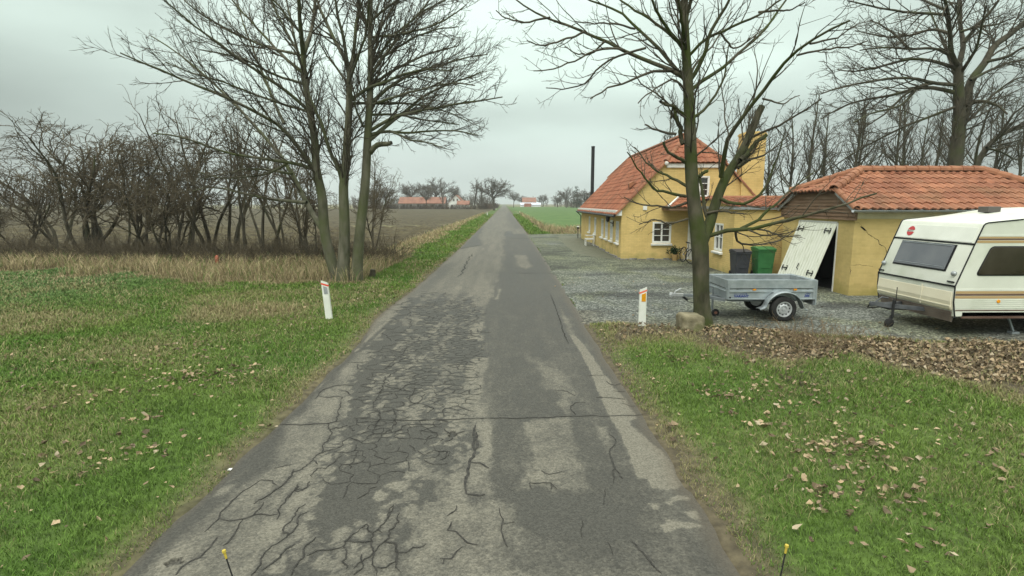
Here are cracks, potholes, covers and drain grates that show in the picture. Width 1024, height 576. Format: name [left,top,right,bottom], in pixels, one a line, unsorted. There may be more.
crack [175,291,631,575]
crack [632,541,662,574]
